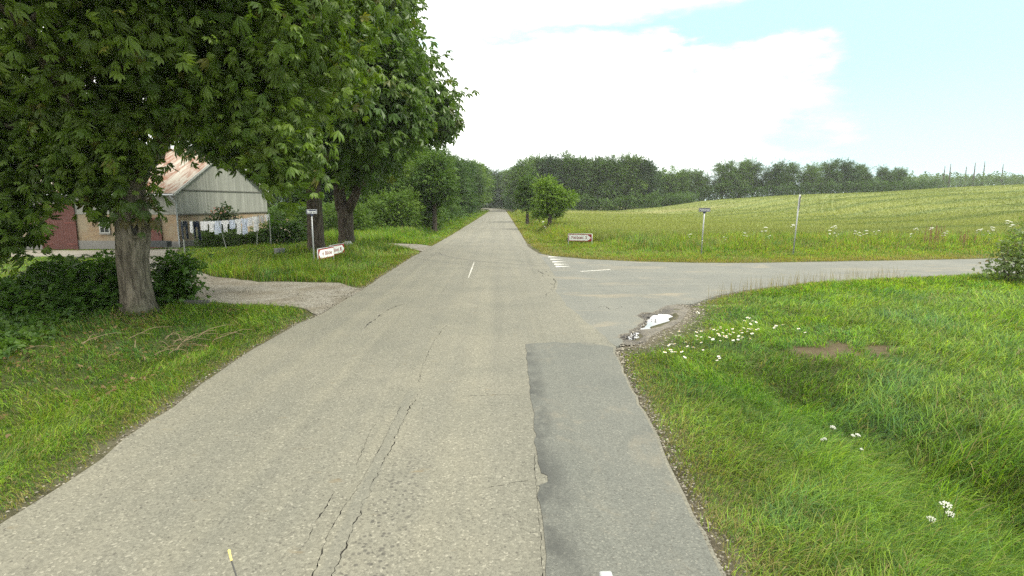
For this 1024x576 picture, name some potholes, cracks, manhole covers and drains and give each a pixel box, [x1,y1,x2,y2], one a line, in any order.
crack [308,400,416,576]
pothole [618,305,689,345]
